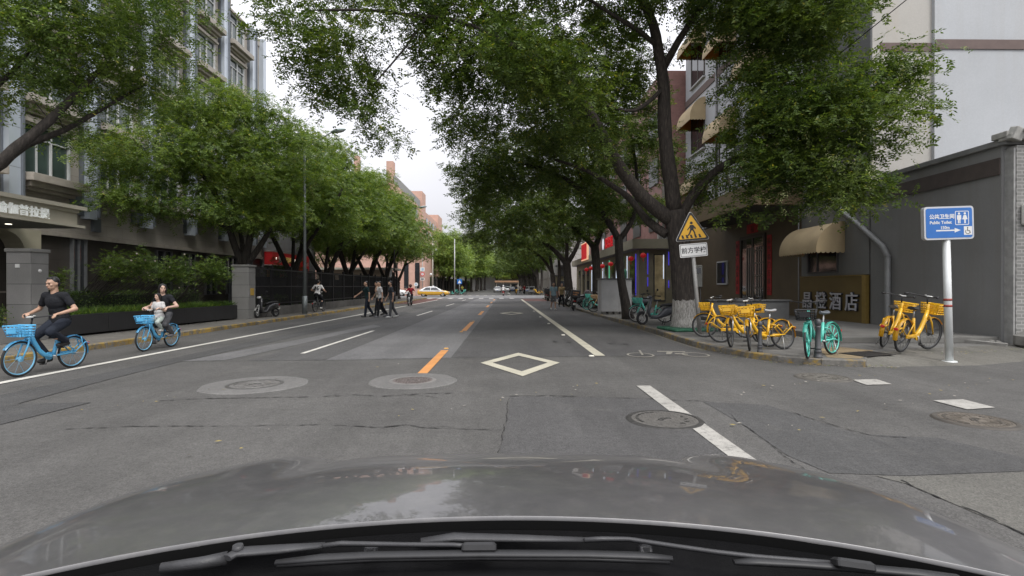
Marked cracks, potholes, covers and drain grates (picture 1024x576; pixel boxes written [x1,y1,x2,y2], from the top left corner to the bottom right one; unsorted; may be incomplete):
manhole cover [793,373,854,383]
manhole cover [196,376,308,395]
crack [69,398,510,453]
manhole cover [626,410,705,430]
manhole cover [930,411,1024,431]
manhole cover [368,373,457,389]
